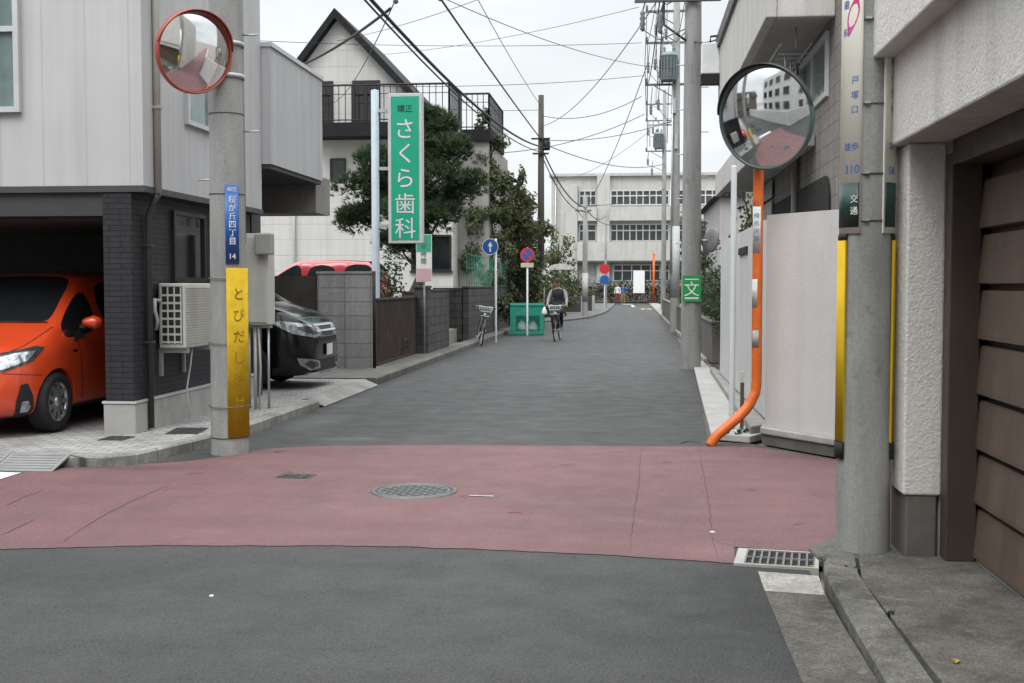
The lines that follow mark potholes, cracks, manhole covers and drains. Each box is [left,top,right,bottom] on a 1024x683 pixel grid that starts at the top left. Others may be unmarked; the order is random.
manhole cover [371,483,457,499]
drain grate [734,548,819,576]
